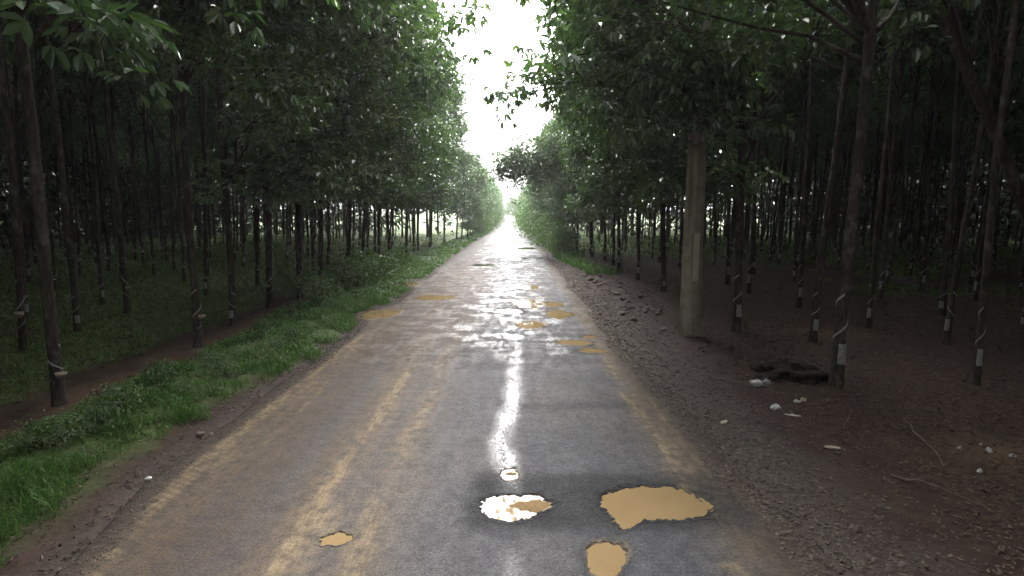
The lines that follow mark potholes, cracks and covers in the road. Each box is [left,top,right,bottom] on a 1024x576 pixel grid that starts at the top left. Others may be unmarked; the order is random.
pothole [498,466,521,482]
pothole [469,491,564,525]
pothole [574,346,611,354]
pothole [542,308,581,320]
pothole [314,529,358,547]
pothole [354,309,406,321]
pothole [513,320,550,330]
pothole [581,537,632,576]
pothole [588,480,731,535]
